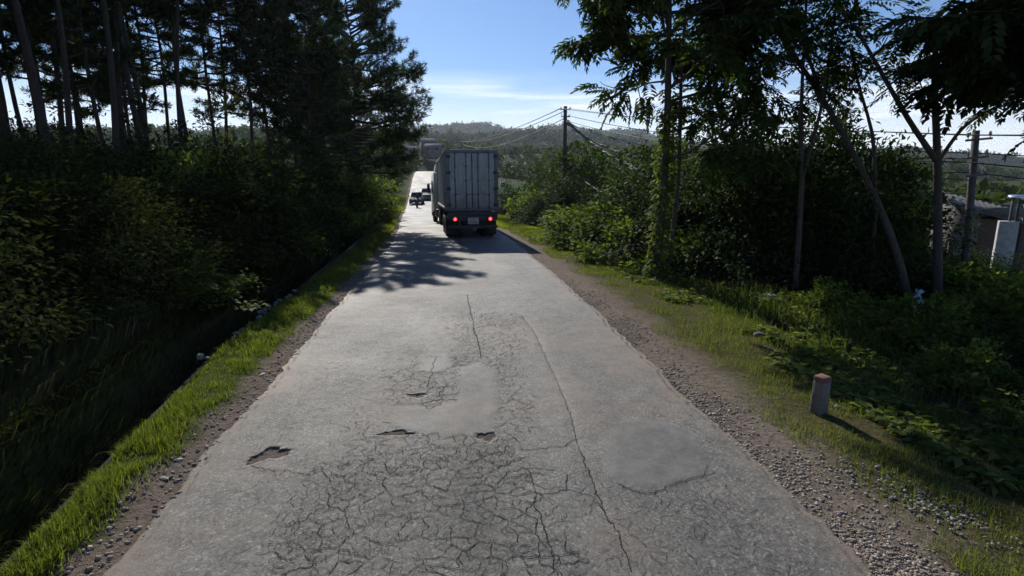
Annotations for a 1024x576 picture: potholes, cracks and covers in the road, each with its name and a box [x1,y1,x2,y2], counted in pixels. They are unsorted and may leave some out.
pothole [363,427,430,438]
pothole [394,391,438,401]
crack [199,311,594,576]
pothole [466,428,505,448]
pothole [230,442,303,471]
